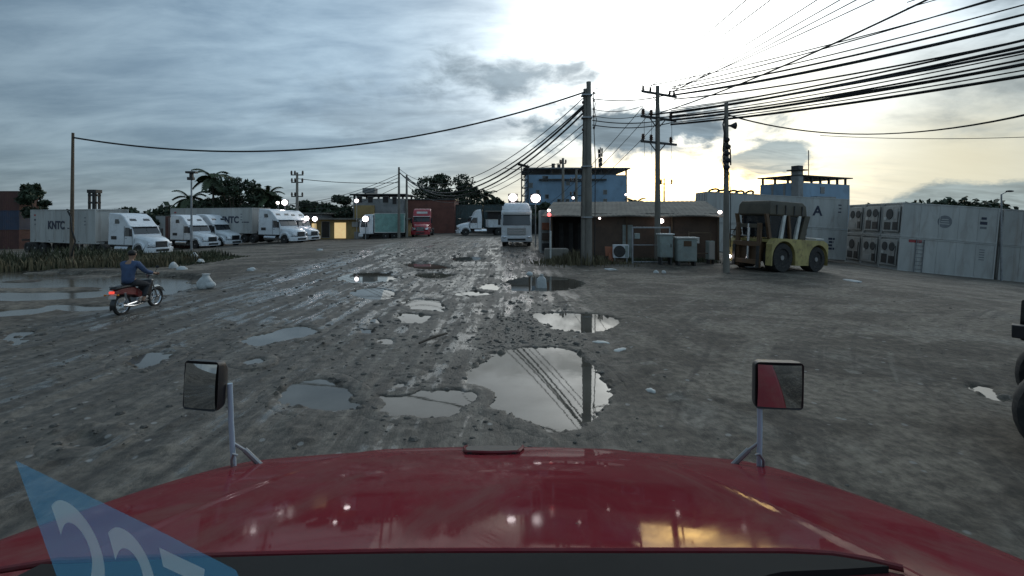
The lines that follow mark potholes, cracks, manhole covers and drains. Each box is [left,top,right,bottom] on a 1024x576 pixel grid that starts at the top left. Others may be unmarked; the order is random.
pothole [494,275,592,292]
pothole [523,309,632,335]
pothole [330,271,402,284]
pothole [349,381,496,425]
pothole [227,322,329,349]
pothole [392,297,454,317]
pothole [257,371,386,418]
pothole [386,310,441,325]
pothole [448,342,630,441]
pothole [401,261,452,270]
